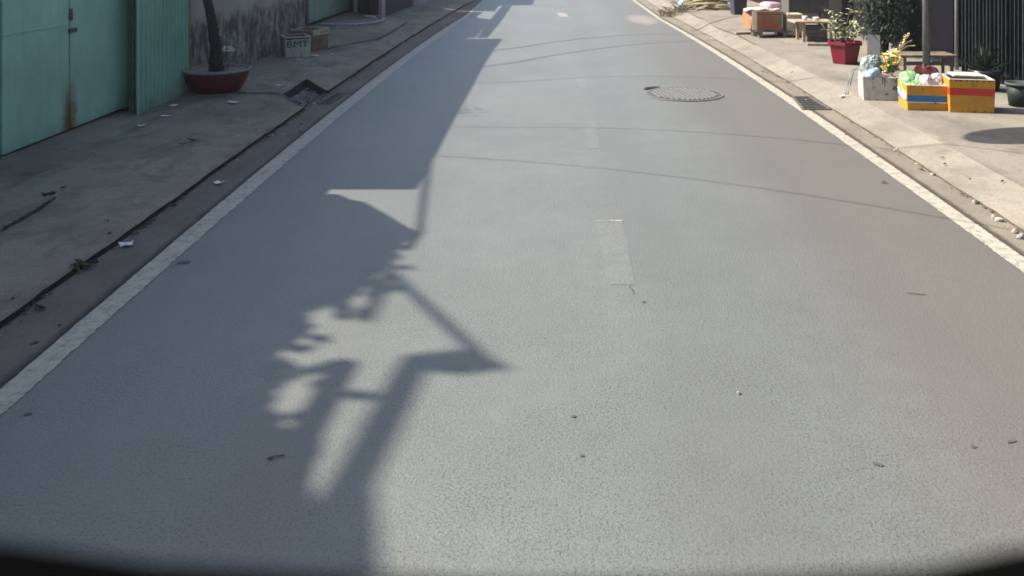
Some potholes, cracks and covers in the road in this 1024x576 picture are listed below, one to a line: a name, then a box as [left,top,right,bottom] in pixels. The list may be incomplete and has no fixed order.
drain grate [317,93,347,104]
drain grate [791,96,832,110]
manhole cover [643,86,724,102]
